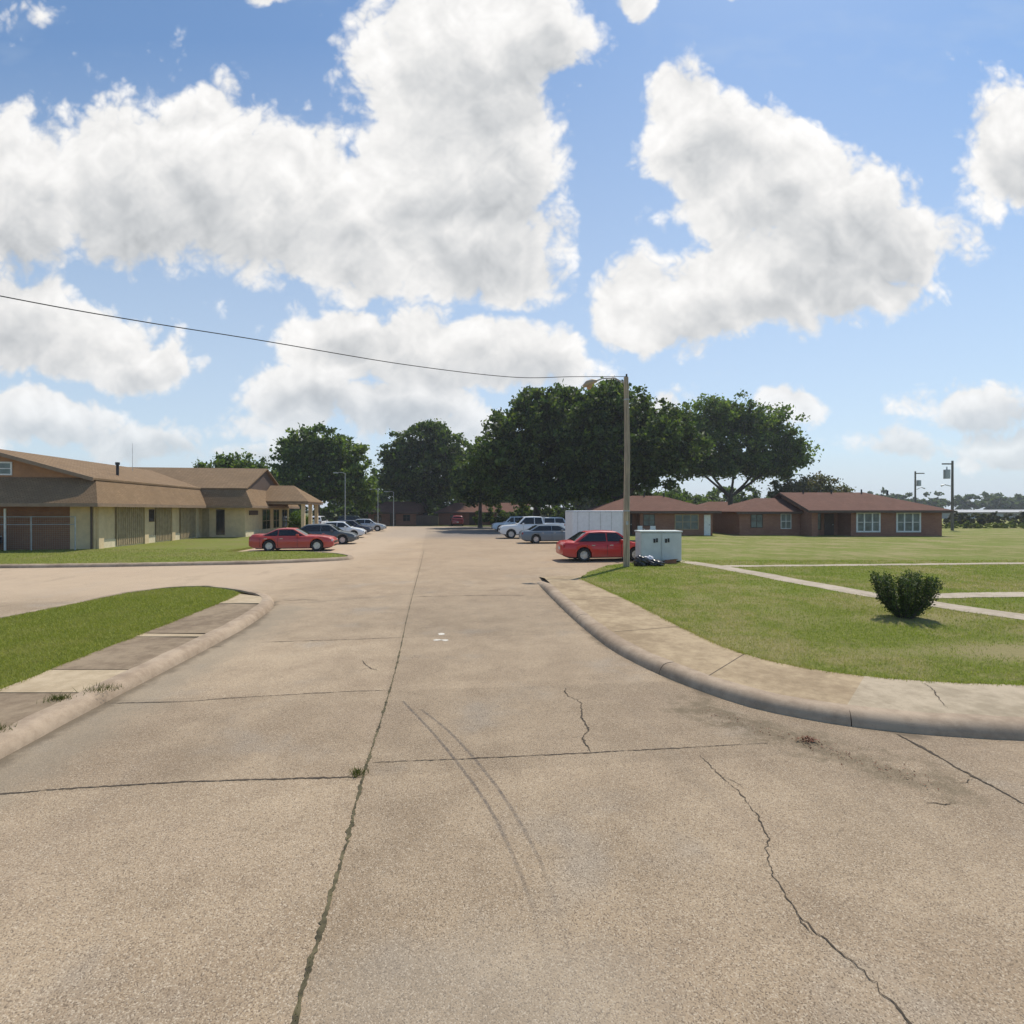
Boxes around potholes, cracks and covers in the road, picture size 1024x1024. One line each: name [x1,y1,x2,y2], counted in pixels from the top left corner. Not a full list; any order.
crack [564,688,591,752]
crack [898,734,1024,804]
crack [700,756,912,1024]
